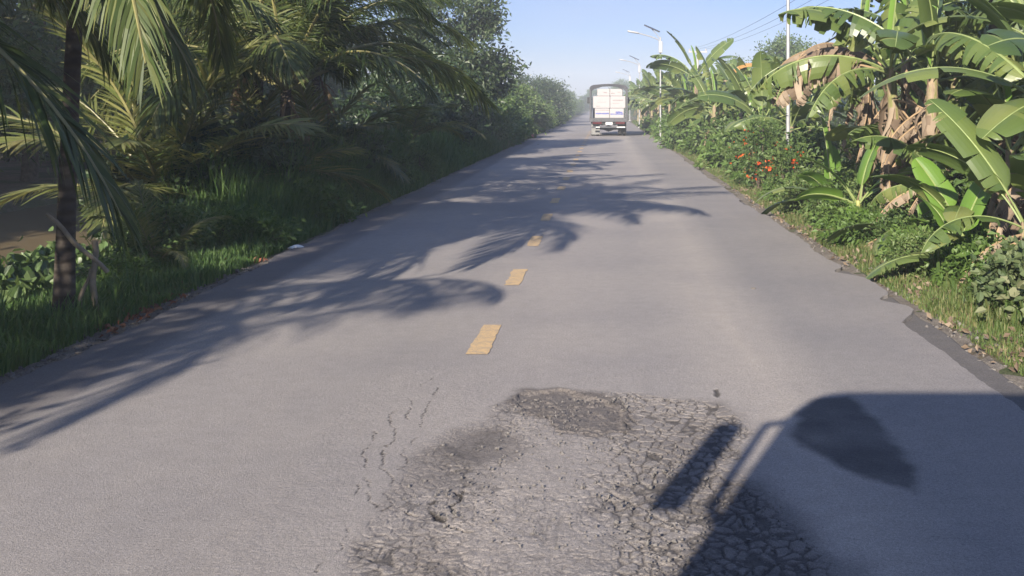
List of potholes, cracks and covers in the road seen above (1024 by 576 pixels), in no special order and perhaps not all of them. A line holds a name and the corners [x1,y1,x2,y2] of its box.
pothole [507,388,629,435]
crack [311,375,844,576]
